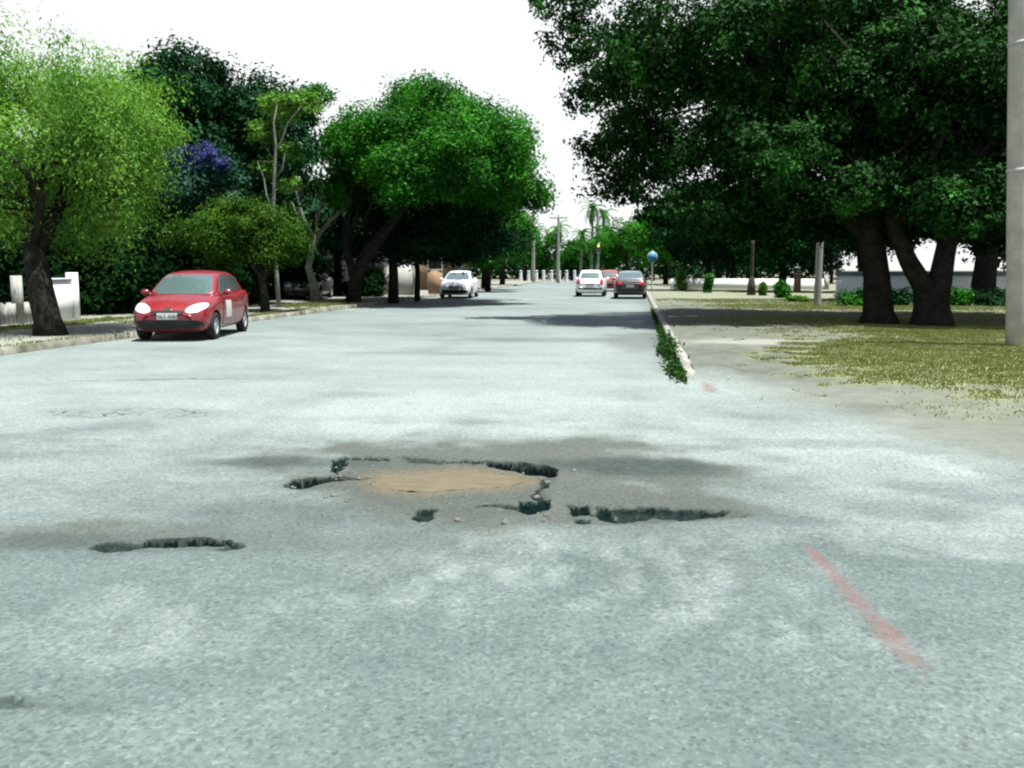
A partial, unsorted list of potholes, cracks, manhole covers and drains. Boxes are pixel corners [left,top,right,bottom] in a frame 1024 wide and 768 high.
pothole [0,694,44,711]
pothole [86,537,248,557]
pothole [260,452,577,526]
pothole [563,502,760,526]
crack [39,406,214,419]
